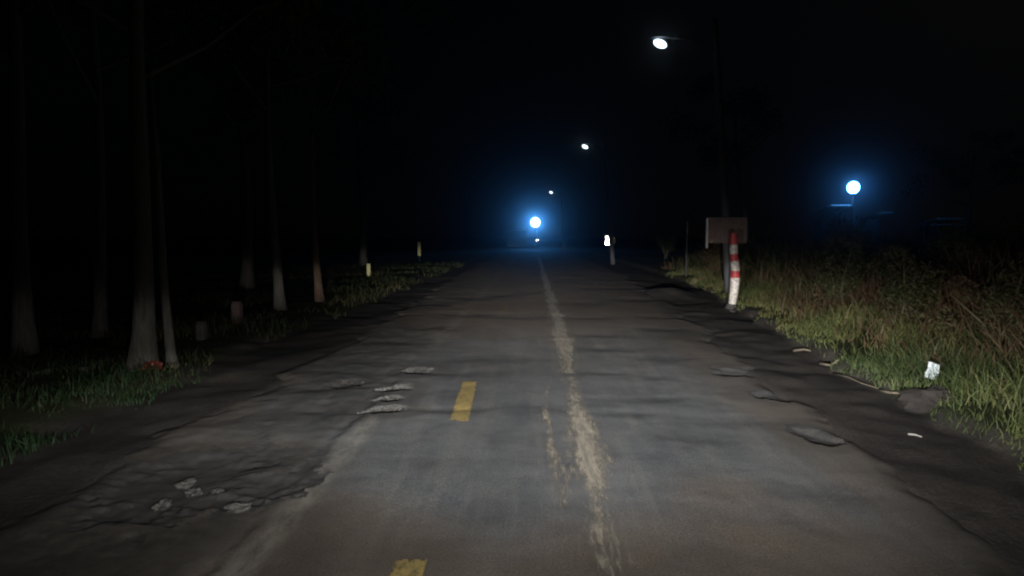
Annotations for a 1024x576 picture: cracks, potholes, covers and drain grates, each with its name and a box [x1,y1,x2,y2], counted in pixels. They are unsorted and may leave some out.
pothole [744,388,794,403]
pothole [708,366,754,378]
pothole [371,383,415,393]
pothole [784,423,847,447]
pothole [57,434,334,547]
pothole [356,404,414,415]
pothole [323,378,371,389]
pothole [399,366,435,375]
